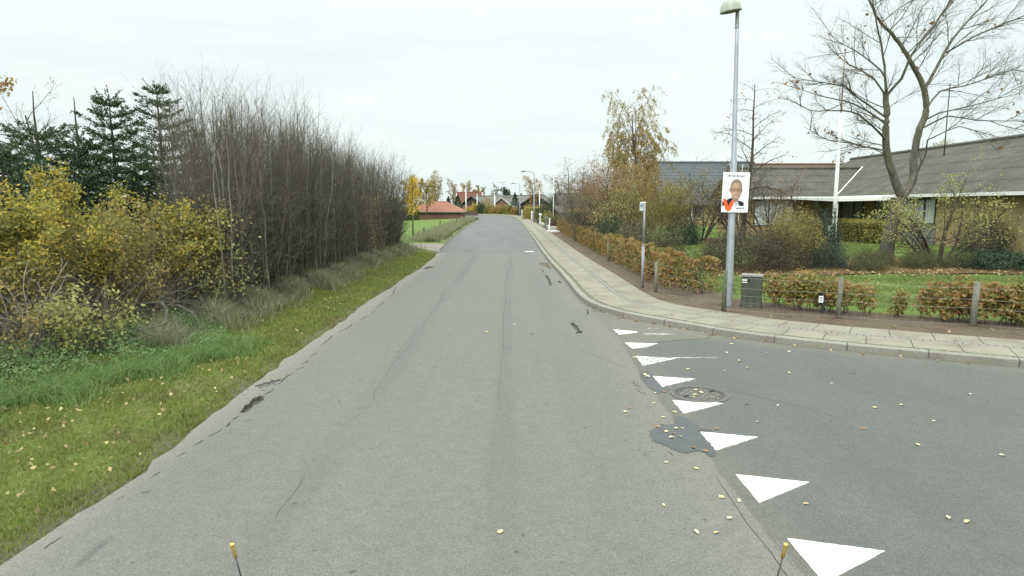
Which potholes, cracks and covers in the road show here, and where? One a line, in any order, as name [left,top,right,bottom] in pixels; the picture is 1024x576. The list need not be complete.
pothole [240,396,265,413]
manhole cover [670,386,730,403]
